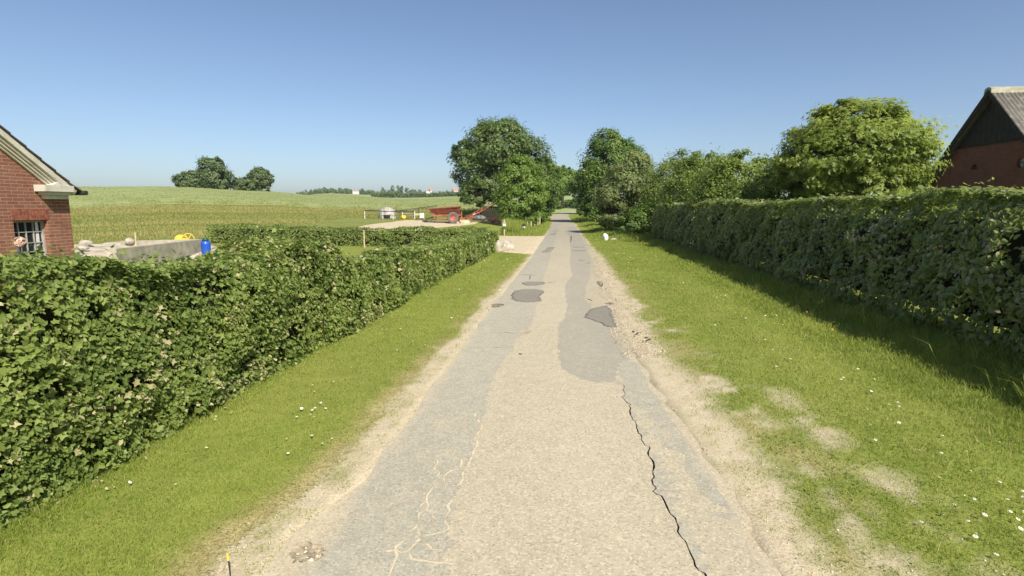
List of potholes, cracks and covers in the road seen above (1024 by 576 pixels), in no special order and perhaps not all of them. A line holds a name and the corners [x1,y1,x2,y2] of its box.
pothole [289,540,326,563]
crack [623,384,707,576]
